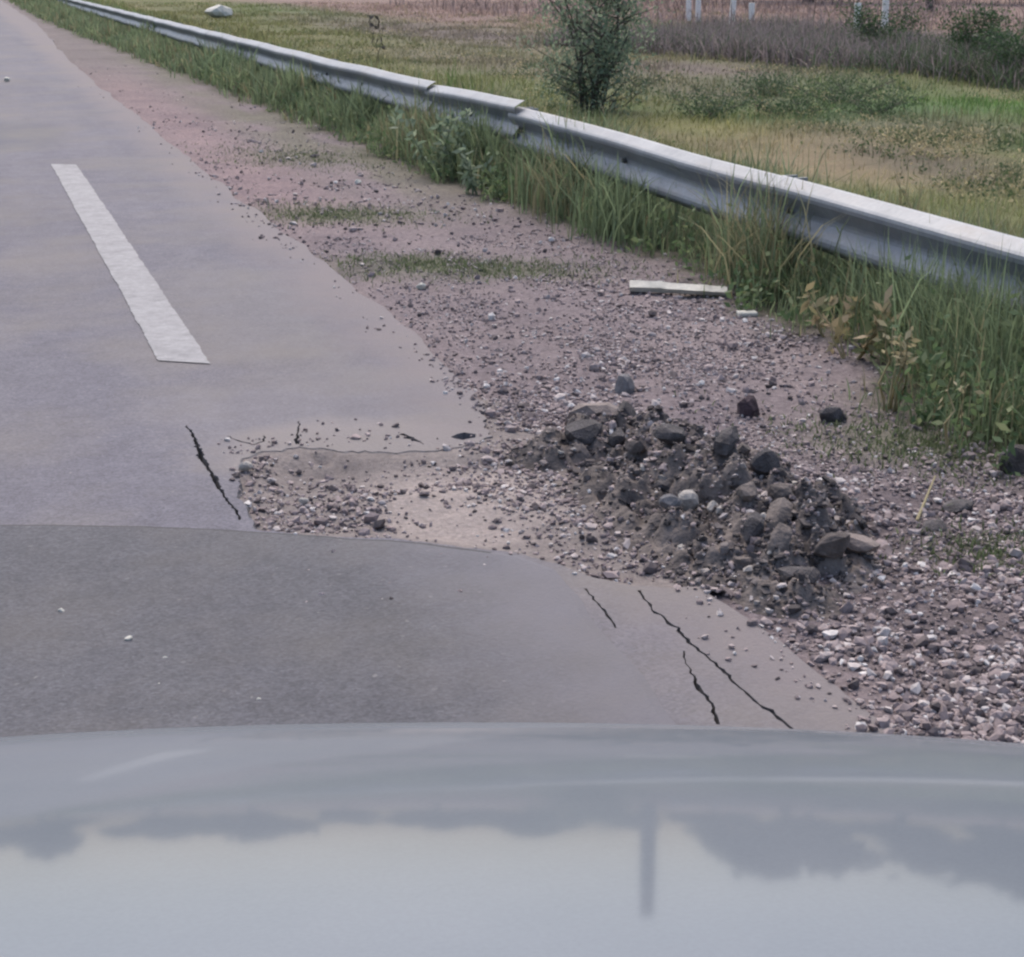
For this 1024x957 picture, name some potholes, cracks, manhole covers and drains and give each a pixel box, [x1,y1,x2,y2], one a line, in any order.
crack [185,426,266,520]
crack [586,589,616,628]
pothole [233,397,726,592]
crack [640,592,794,729]
